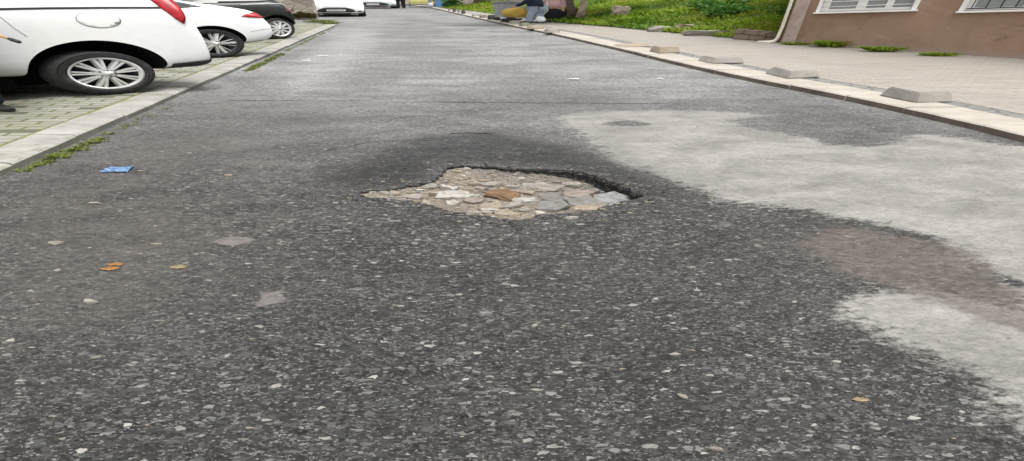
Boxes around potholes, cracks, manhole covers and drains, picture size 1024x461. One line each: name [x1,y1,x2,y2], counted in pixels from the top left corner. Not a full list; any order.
pothole [347,160,671,225]
